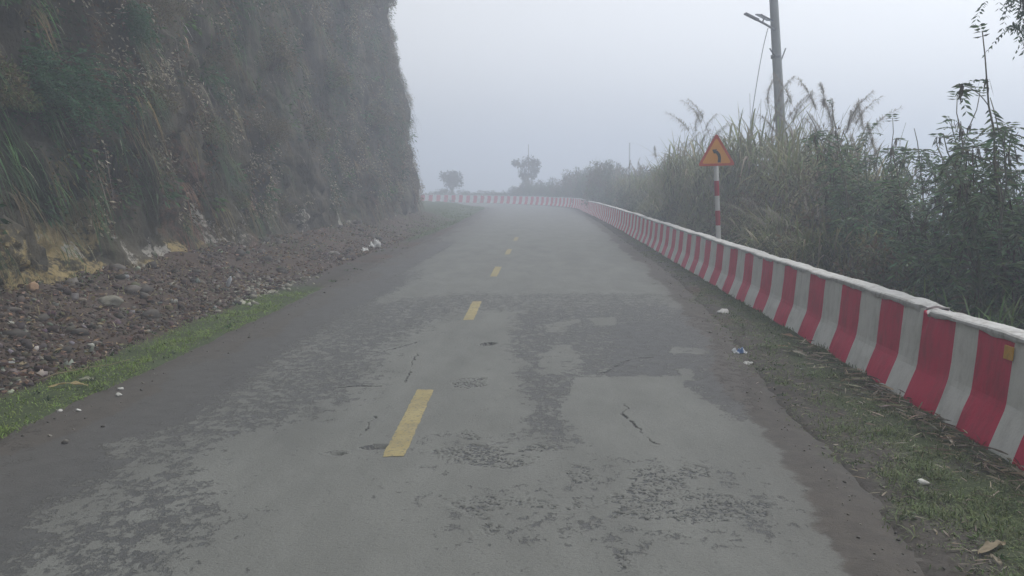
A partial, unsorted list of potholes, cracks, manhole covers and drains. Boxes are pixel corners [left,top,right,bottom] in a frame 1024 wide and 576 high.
crack [329,341,425,390]
pothole [318,449,352,458]
crack [348,414,387,439]
crack [595,356,661,375]
pothole [353,442,389,452]
crack [418,402,783,576]
